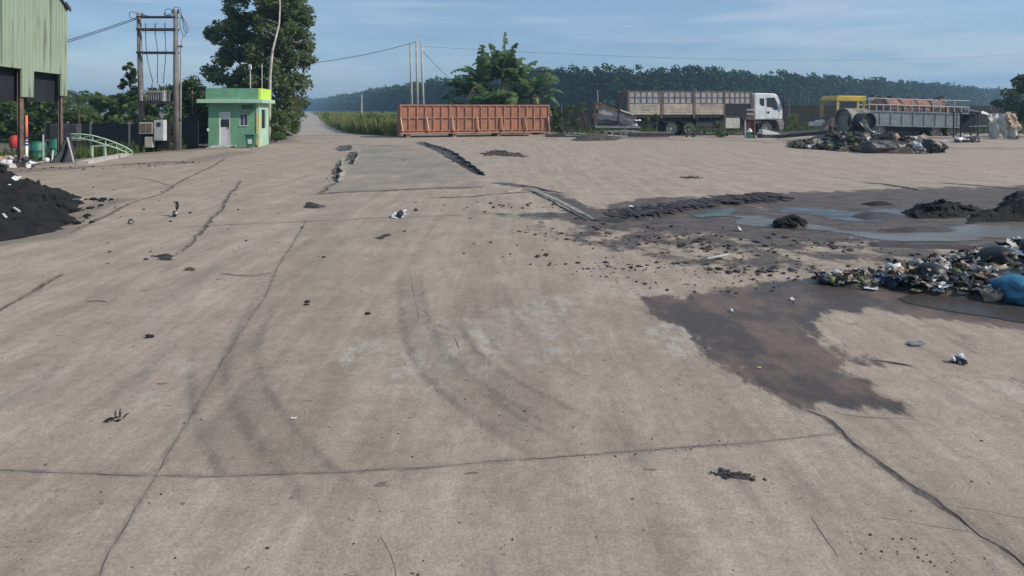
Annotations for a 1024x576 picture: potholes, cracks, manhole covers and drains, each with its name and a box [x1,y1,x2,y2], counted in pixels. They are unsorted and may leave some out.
crack [0,275,62,311]
crack [69,159,241,254]
crack [807,410,1024,567]
pothole [414,142,485,176]
